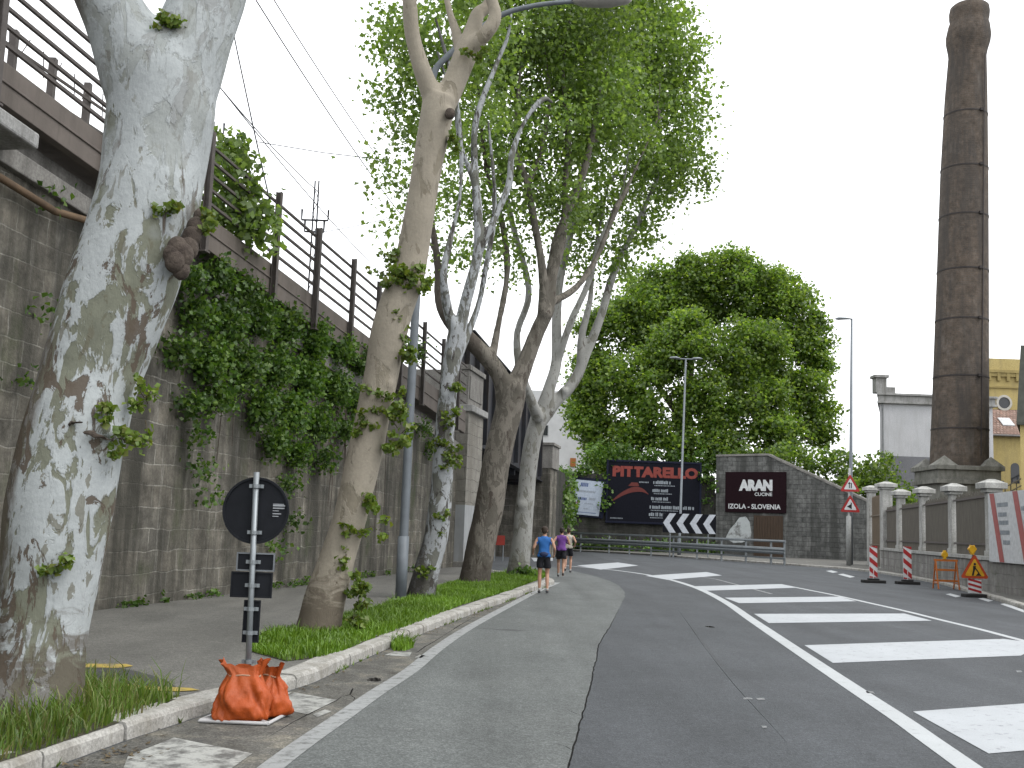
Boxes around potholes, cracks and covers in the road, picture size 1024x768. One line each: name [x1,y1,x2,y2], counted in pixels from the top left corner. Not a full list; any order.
crack [272,689,355,735]
